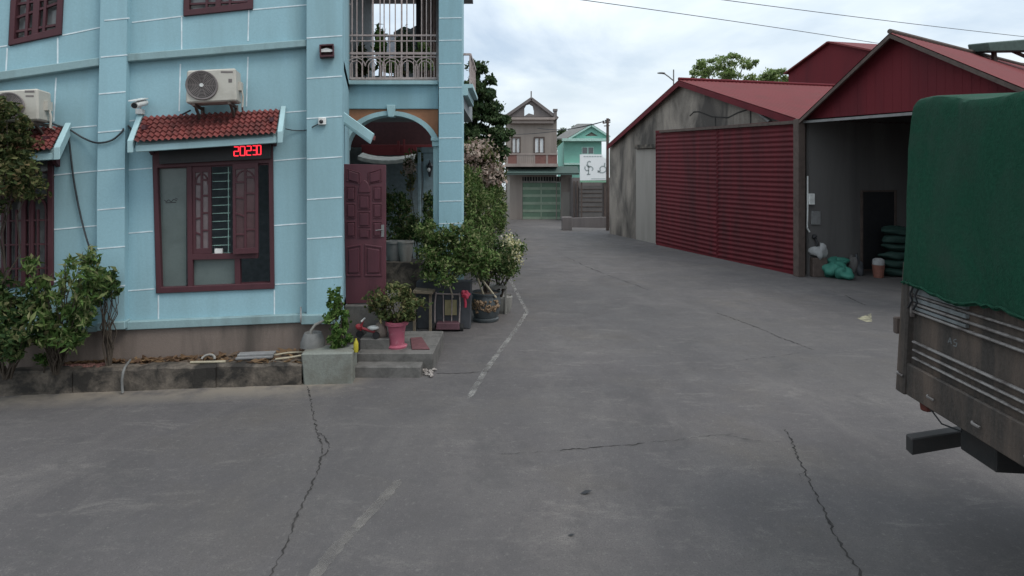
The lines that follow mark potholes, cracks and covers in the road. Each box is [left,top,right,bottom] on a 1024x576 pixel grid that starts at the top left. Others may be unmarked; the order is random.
crack [269,386,329,576]
crack [784,429,862,576]
crack [498,434,783,454]
